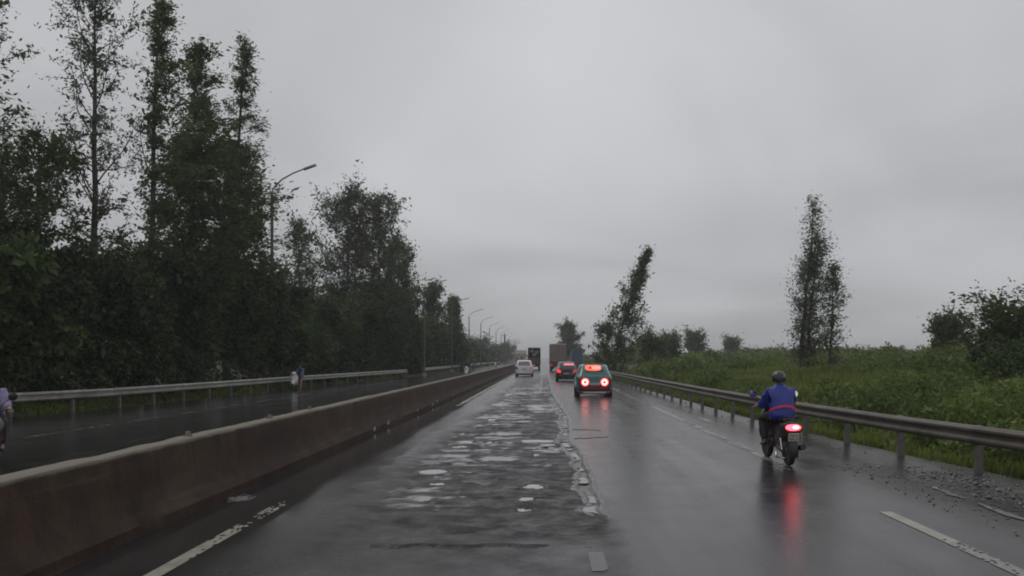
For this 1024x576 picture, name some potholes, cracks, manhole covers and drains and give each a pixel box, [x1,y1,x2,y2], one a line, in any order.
pothole [515,482,549,490]
pothole [225,493,256,502]
crack [549,395,610,518]
